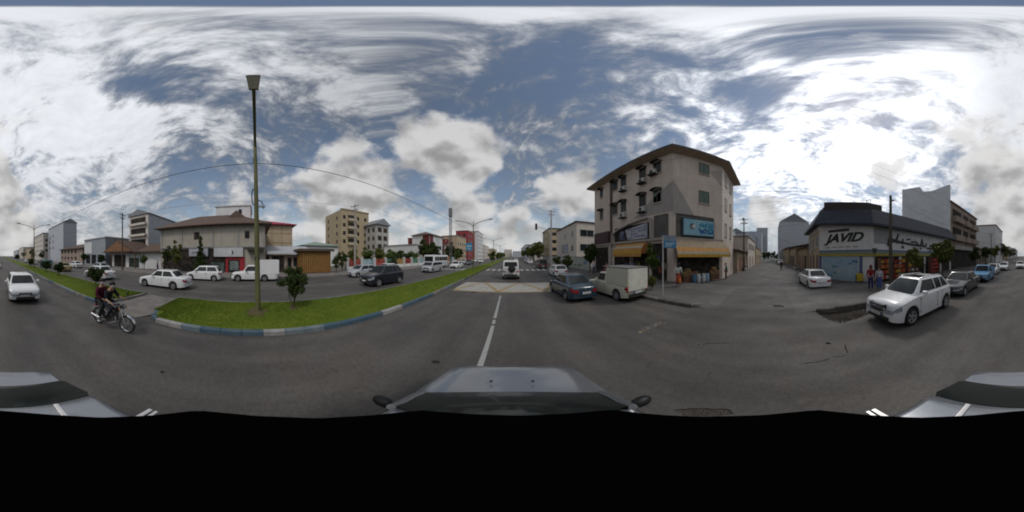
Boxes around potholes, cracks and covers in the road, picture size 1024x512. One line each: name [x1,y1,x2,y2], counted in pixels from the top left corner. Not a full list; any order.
pothole [817,306,869,324]
